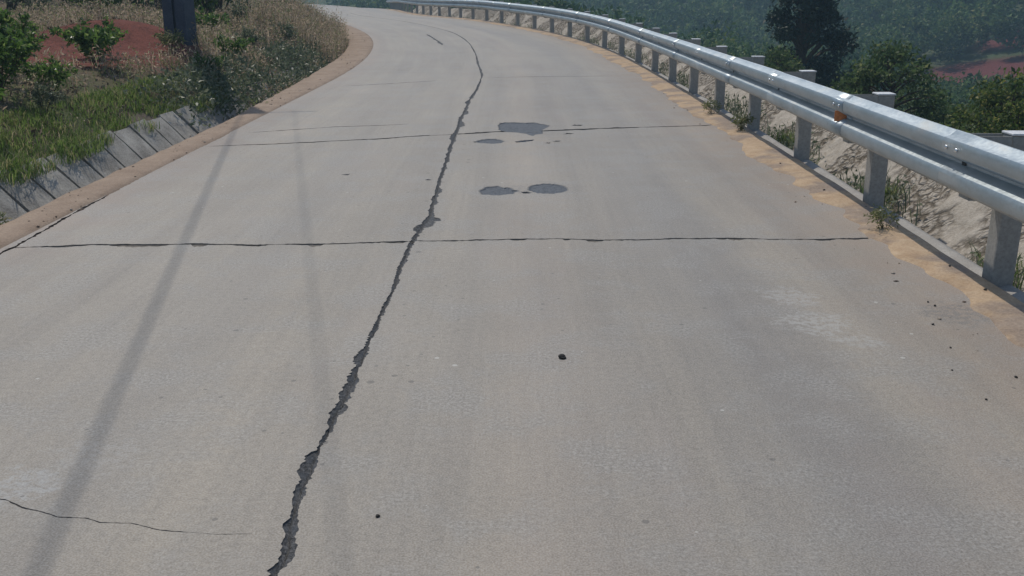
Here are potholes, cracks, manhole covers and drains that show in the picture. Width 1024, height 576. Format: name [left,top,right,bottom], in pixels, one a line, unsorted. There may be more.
crack [0,499,252,535]
crack [267,13,483,576]
